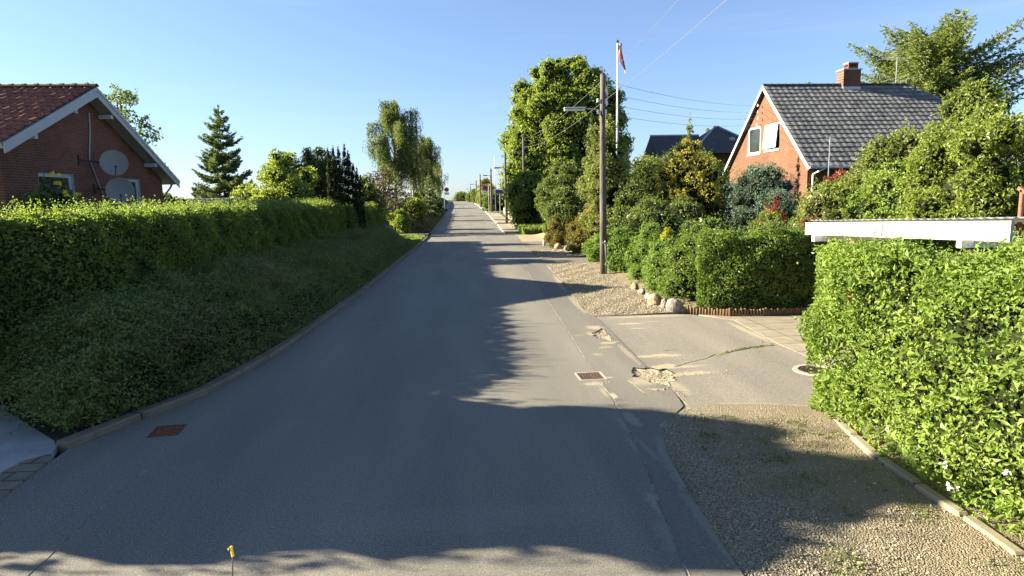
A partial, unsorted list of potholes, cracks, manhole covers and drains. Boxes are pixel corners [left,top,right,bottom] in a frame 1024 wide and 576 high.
pothole [631,367,677,386]
drain grate [575,371,608,381]
drain grate [146,424,187,438]
pothole [592,328,611,341]
manhole cover [793,364,834,377]
crack [664,341,791,367]
